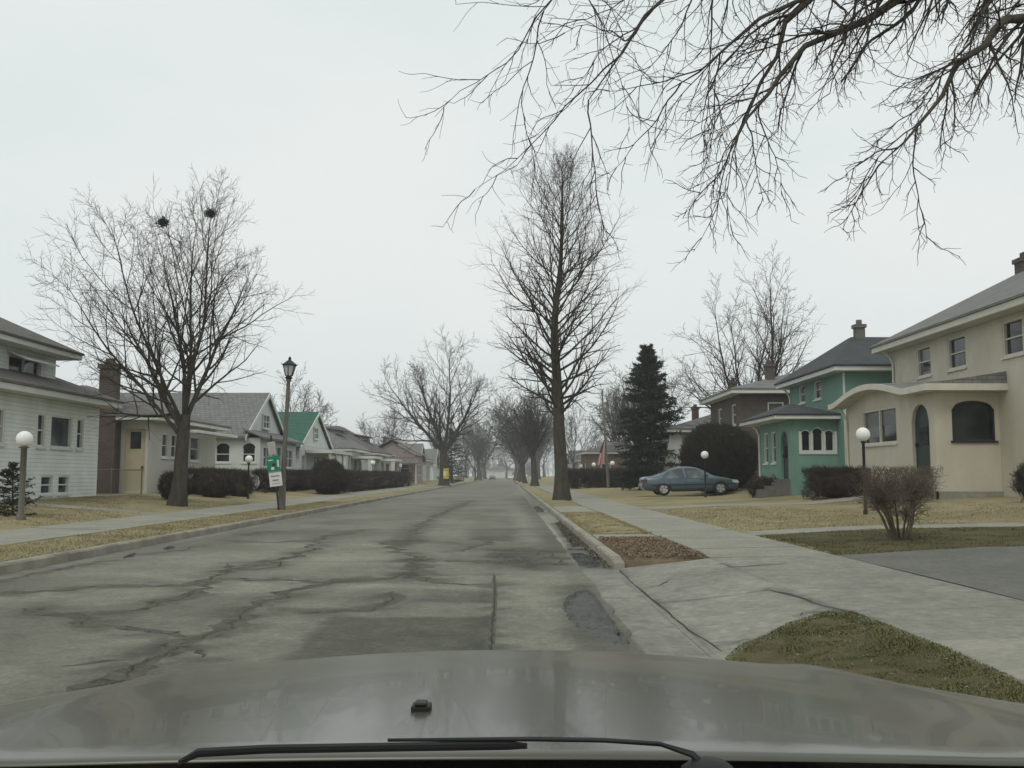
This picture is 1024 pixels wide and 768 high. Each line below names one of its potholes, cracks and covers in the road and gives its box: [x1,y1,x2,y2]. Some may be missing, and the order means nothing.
pothole [562,590,630,644]
crack [0,500,564,692]
